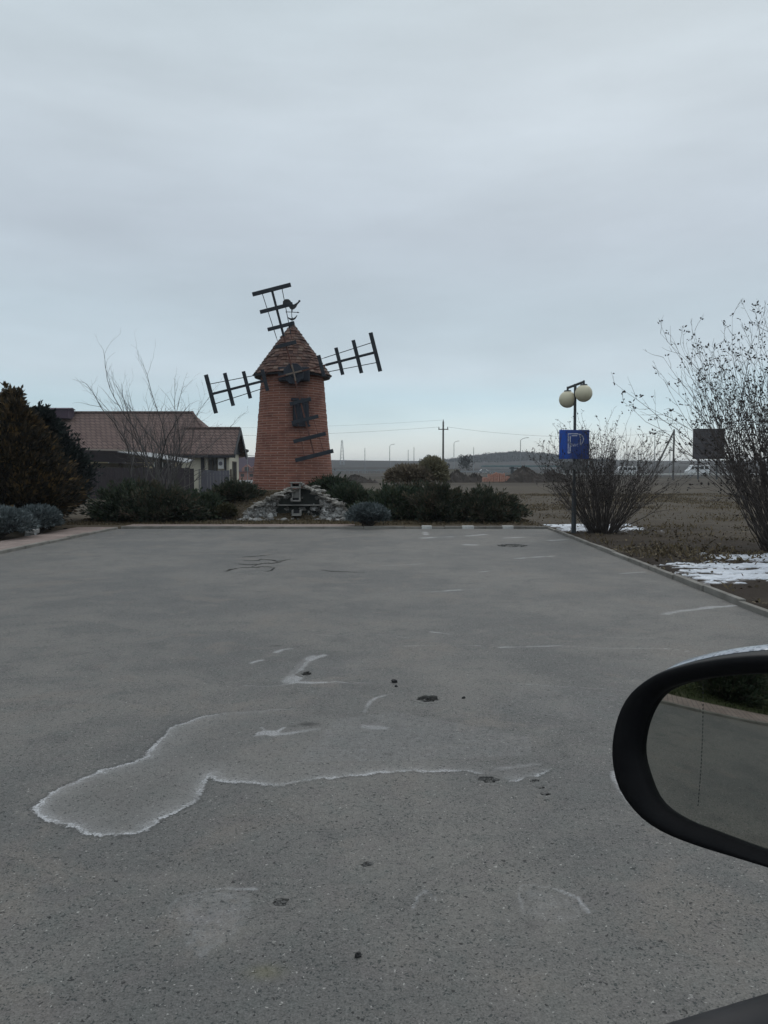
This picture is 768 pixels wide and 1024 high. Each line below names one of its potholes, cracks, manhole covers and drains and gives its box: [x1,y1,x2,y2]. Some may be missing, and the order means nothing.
pothole [469,774,509,787]
pothole [410,694,445,704]
crack [226,555,289,572]
